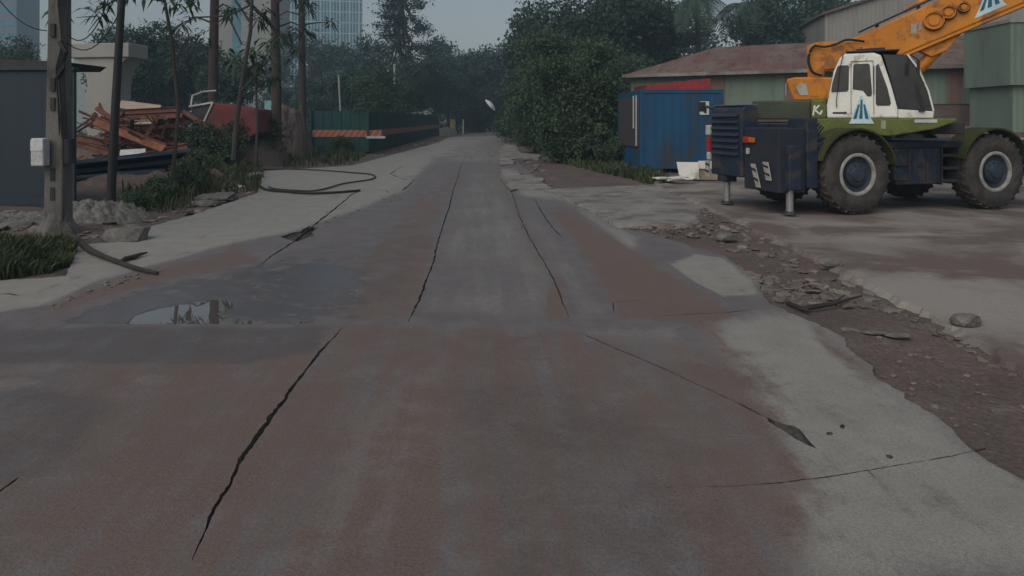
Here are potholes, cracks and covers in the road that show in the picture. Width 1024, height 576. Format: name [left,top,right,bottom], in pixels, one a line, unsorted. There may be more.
crack [259,192,363,266]
crack [387,155,466,321]
pothole [767,417,815,448]
crack [712,448,986,487]
crack [499,169,771,421]
crack [192,333,338,560]
